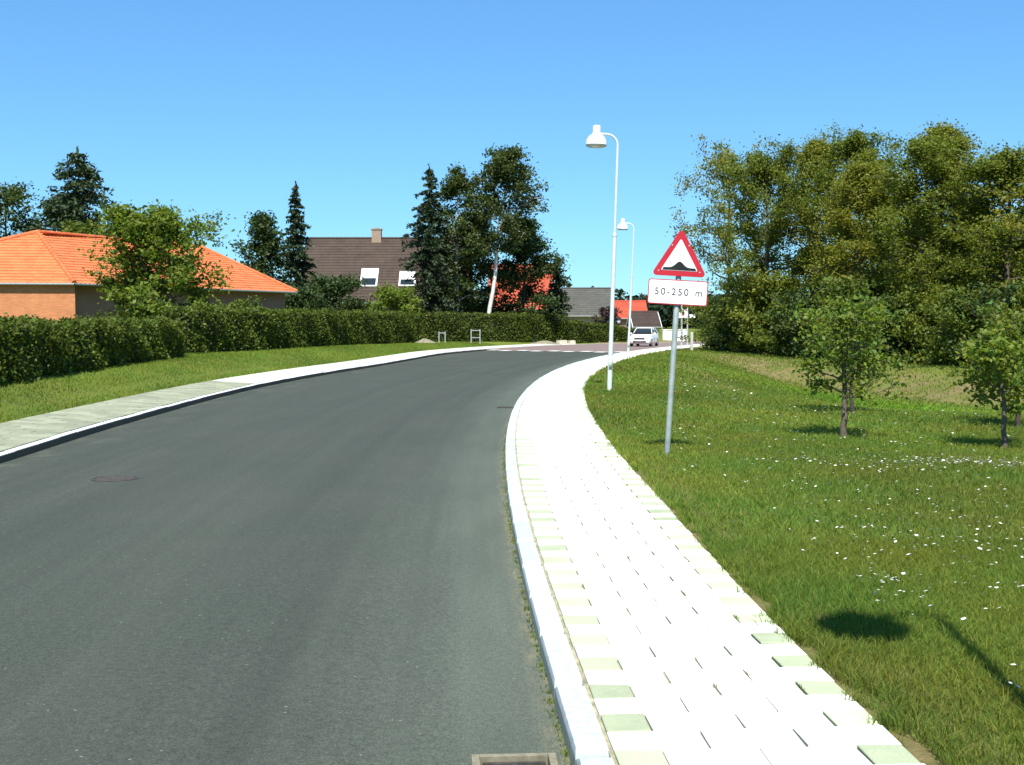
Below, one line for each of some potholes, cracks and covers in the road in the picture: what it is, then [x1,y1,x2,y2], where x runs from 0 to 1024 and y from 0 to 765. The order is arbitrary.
drain grate [471,753,558,765]
